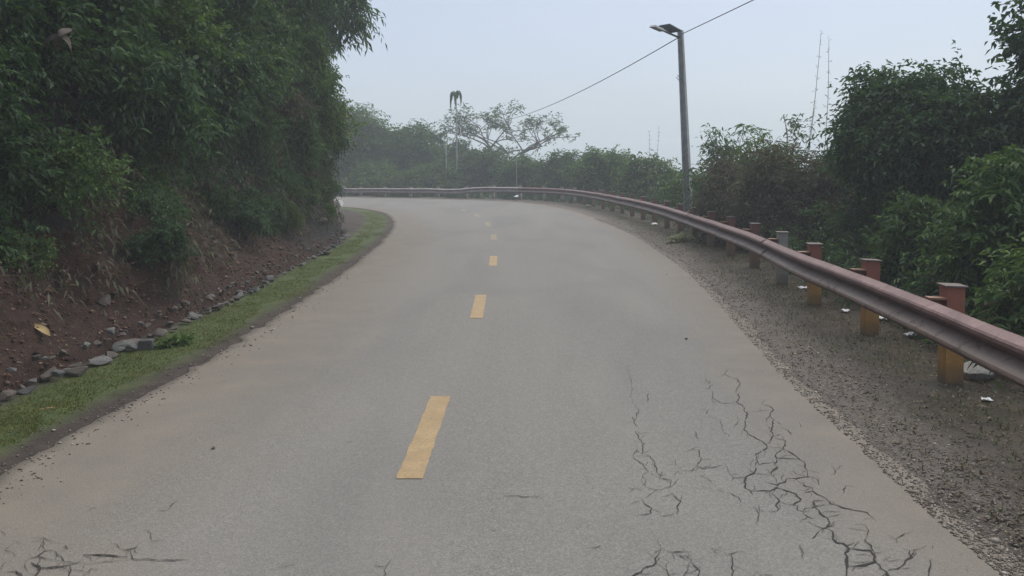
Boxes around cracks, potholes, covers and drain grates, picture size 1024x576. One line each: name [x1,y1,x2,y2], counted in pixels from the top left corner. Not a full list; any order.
crack [624,371,932,576]
crack [0,530,185,576]
